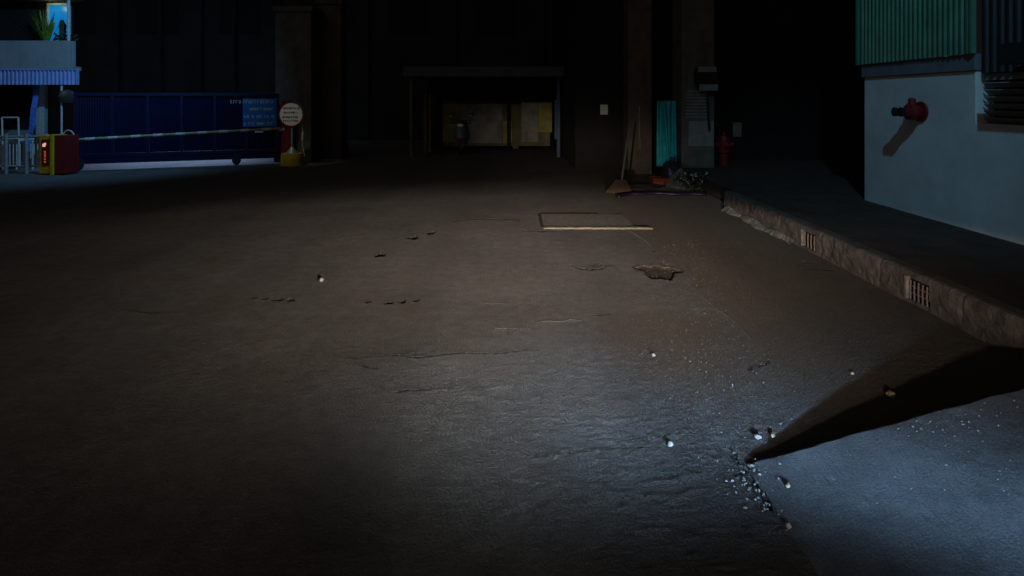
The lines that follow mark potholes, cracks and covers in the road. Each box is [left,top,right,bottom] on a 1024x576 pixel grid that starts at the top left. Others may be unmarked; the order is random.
pothole [630,263,687,283]
manhole cover [537,212,653,230]
drain grate [800,229,816,251]
drain grate [904,275,930,308]
crack [334,326,542,396]
